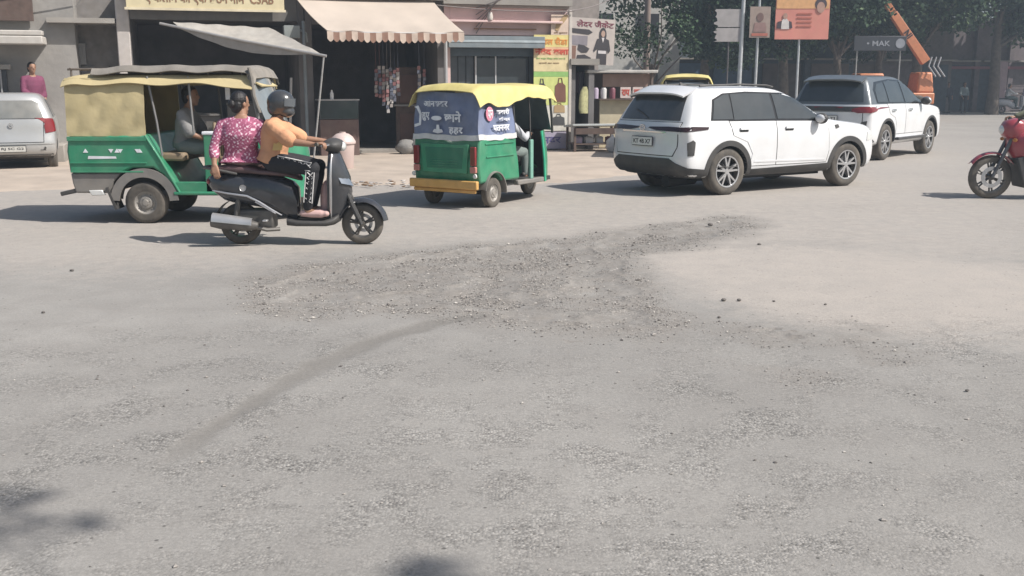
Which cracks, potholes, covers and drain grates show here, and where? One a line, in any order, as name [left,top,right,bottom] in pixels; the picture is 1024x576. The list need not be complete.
pothole [263,243,658,330]
